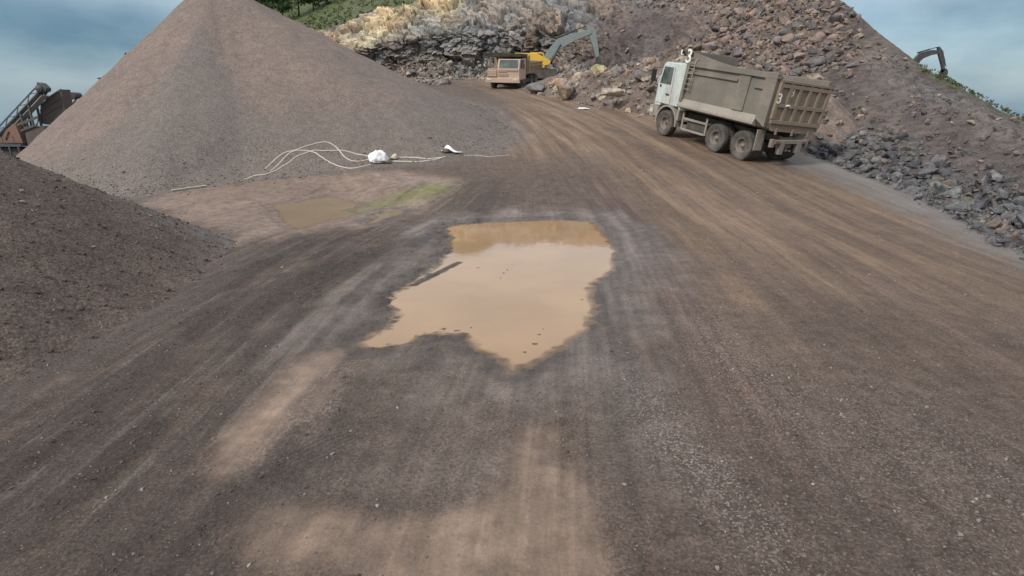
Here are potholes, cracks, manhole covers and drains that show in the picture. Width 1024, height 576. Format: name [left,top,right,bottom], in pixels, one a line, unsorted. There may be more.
pothole [323,215,640,388]
